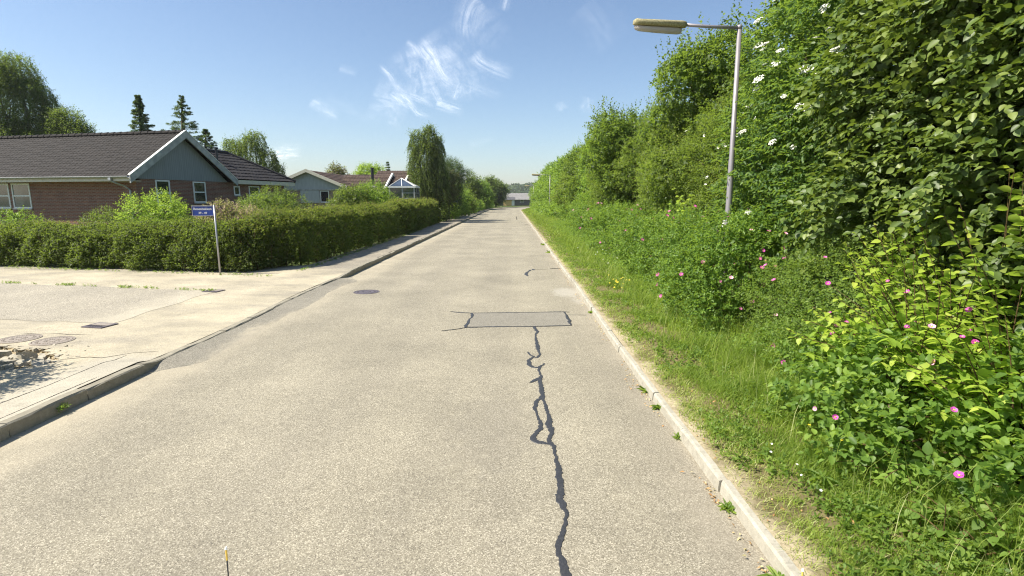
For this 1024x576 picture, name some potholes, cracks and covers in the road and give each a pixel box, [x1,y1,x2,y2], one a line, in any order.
crack [527,327,572,576]
manhole cover [0,334,43,344]
manhole cover [28,336,76,346]
pothole [0,345,63,369]
